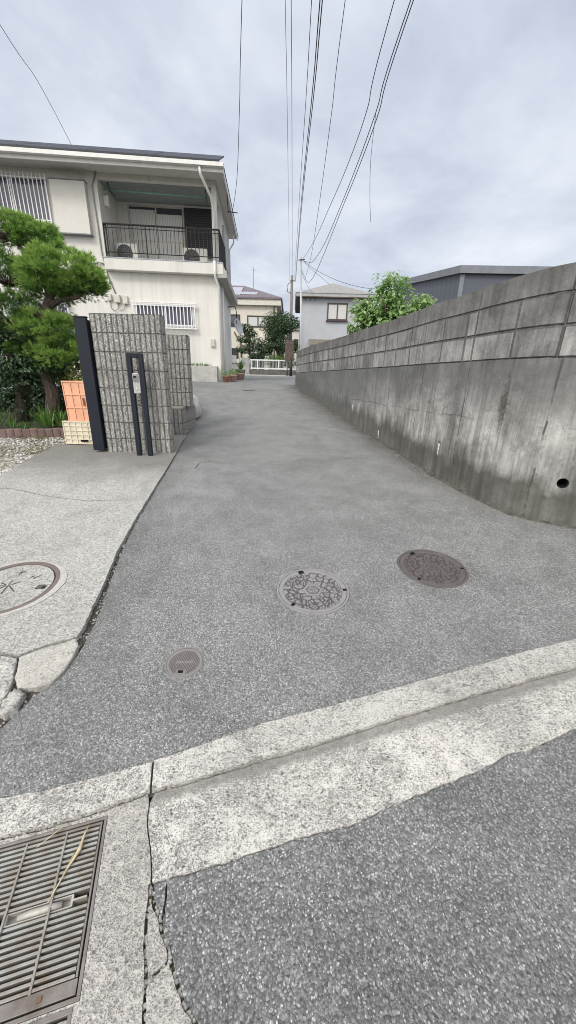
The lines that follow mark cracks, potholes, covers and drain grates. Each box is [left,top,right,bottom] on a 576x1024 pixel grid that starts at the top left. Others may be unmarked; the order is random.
utility cover [165,647,204,678]
manhole cover [397,549,468,588]
manhole cover [276,568,349,615]
crack [142,731,571,1024]
manhole cover [0,560,67,617]
